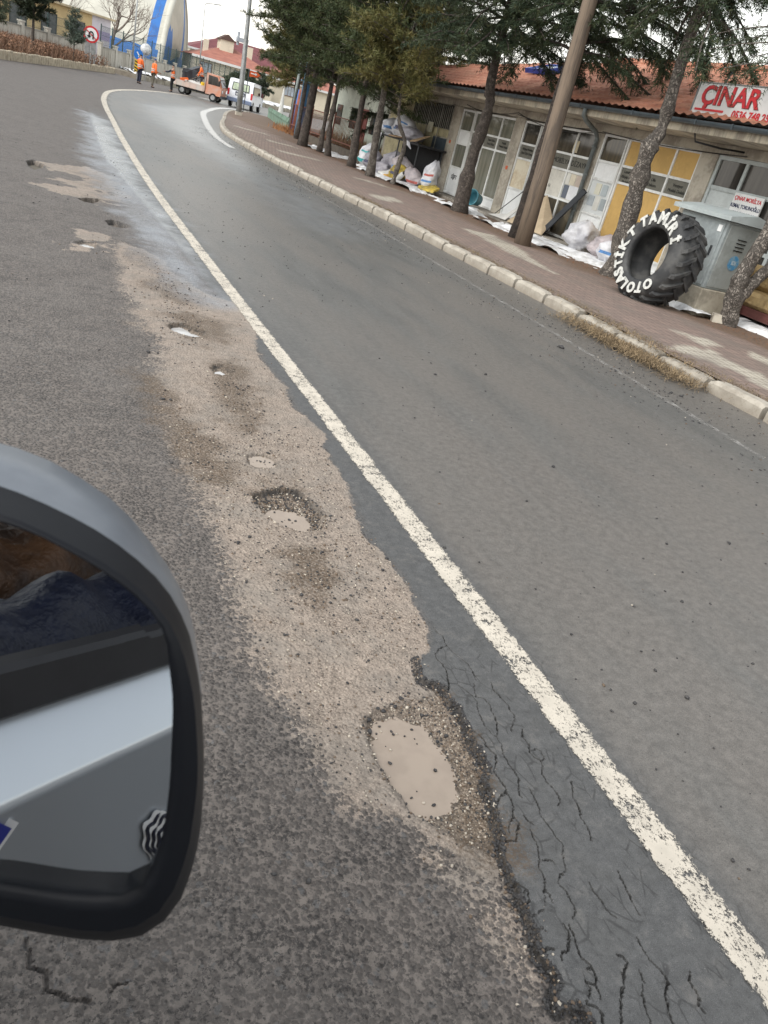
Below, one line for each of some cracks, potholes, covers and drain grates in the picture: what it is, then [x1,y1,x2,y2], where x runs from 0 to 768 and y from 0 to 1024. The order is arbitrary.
pothole [245,452,279,469]
pothole [208,364,235,375]
crack [23,936,129,1004]
crack [433,627,706,1024]
pothole [166,322,207,337]
pothole [359,684,500,851]
pothole [105,219,132,229]
pothole [251,488,328,532]
